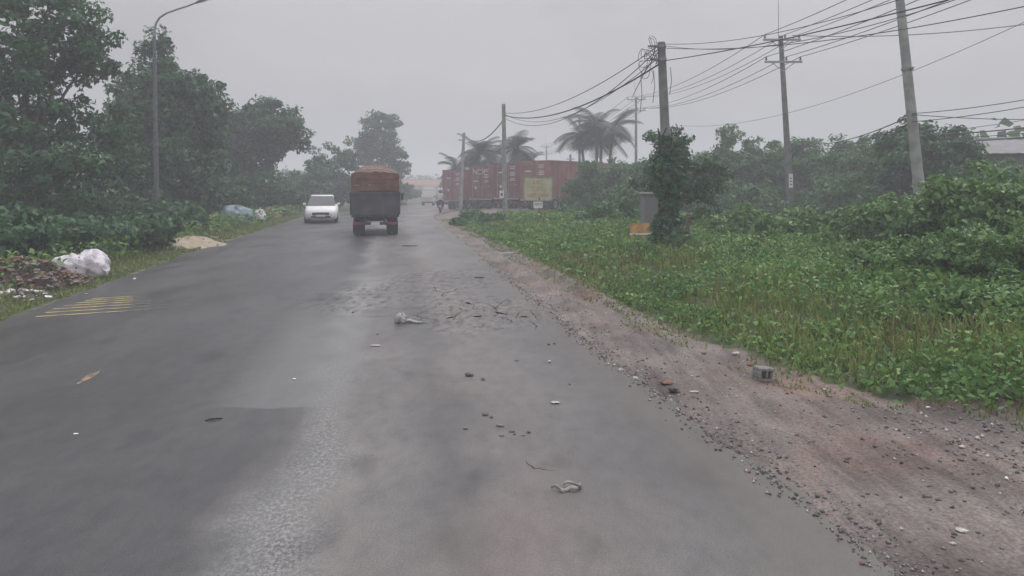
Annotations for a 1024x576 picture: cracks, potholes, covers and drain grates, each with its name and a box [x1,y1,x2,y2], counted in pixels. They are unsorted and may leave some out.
crack [413,287,537,327]
